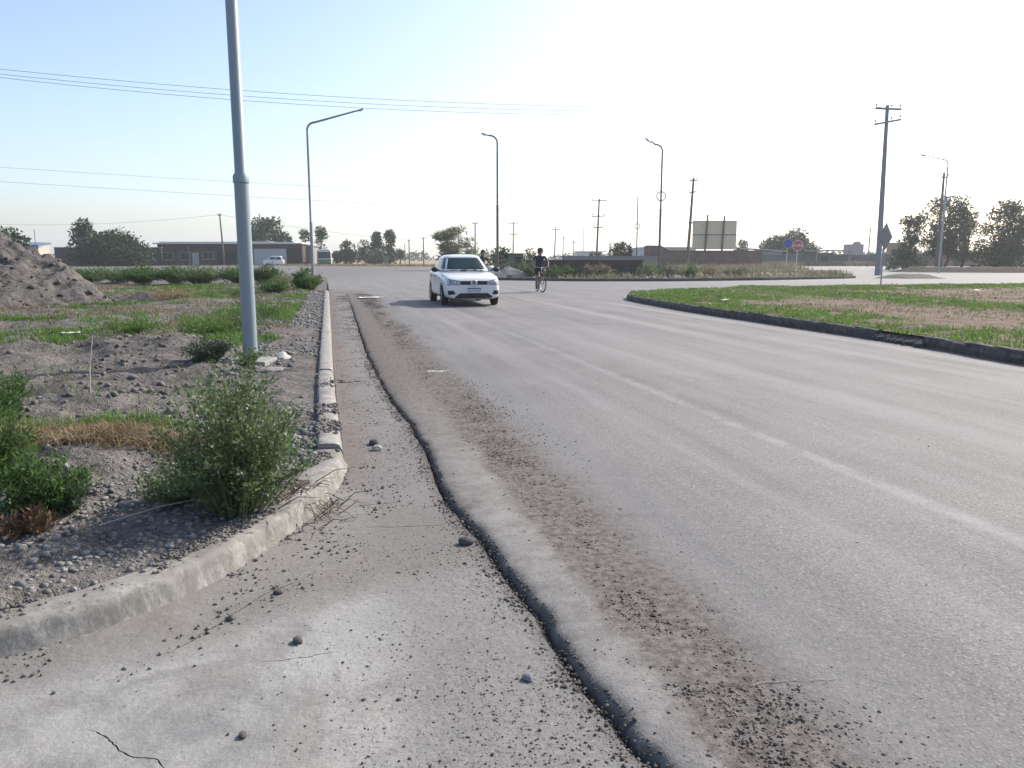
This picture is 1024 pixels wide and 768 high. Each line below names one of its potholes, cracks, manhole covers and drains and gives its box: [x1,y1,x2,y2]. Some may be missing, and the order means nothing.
crack [90,730,164,768]
crack [166,583,292,656]
